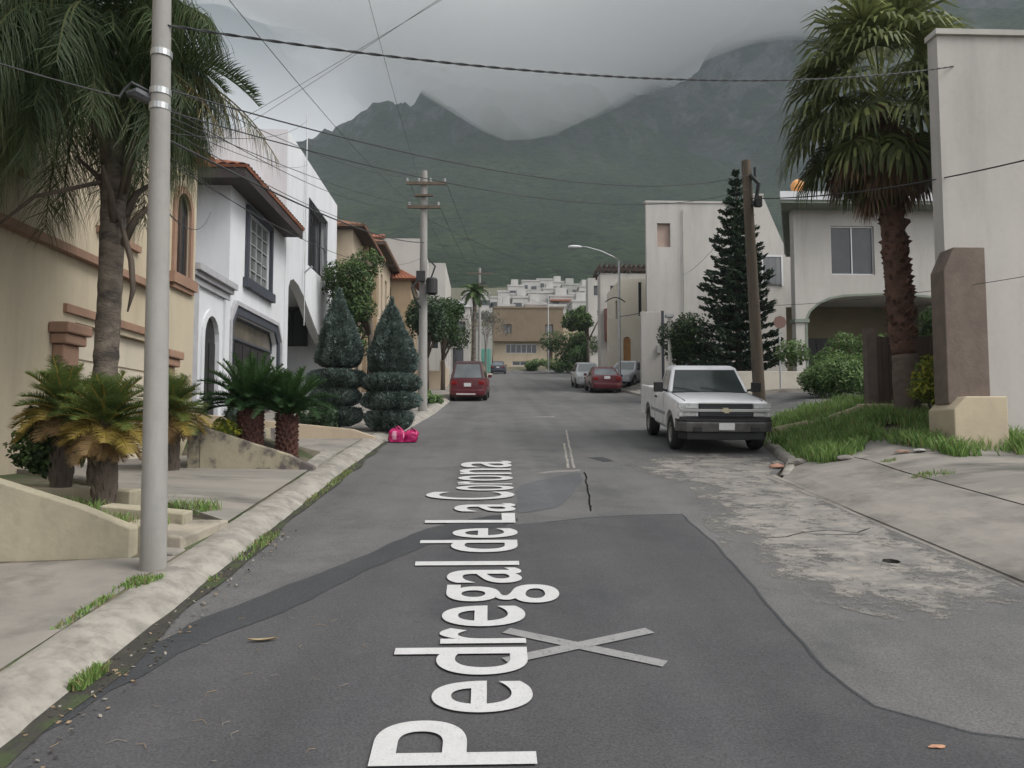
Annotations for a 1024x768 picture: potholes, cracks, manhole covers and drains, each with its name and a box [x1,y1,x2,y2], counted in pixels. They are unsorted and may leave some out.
crack [769,528,870,538]
crack [583,472,592,511]
